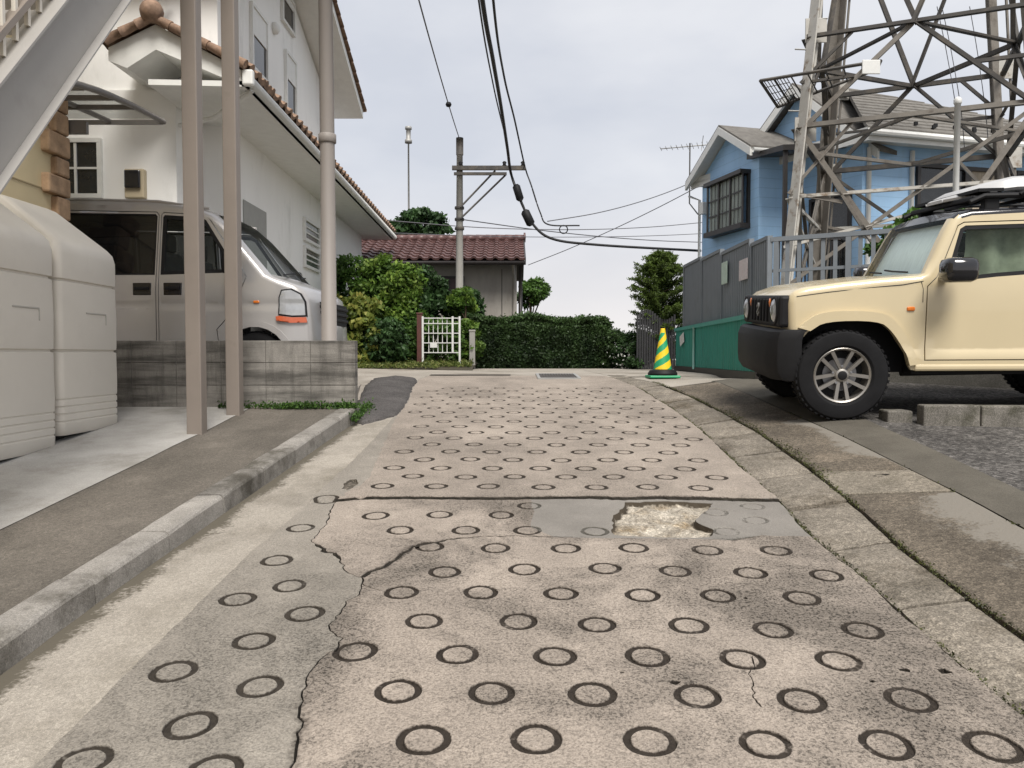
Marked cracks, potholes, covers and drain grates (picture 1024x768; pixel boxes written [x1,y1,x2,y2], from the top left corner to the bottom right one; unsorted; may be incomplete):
pothole [342,479,358,490]
pothole [611,501,713,538]
crack [290,496,779,768]
